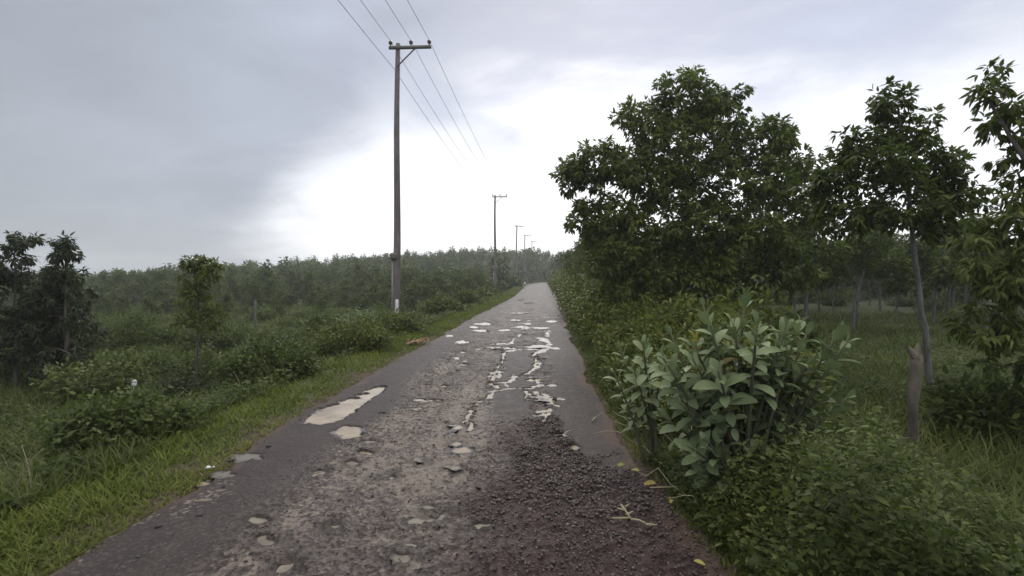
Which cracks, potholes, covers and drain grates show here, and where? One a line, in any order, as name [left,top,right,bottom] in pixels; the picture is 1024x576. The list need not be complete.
pothole [387,550,414,566]
pothole [249,530,283,546]
pothole [448,446,475,455]
pothole [296,385,389,425]
pothole [327,424,369,440]
pothole [405,511,448,526]
pothole [206,469,240,484]
pothole [224,452,266,463]
pothole [240,513,274,525]
